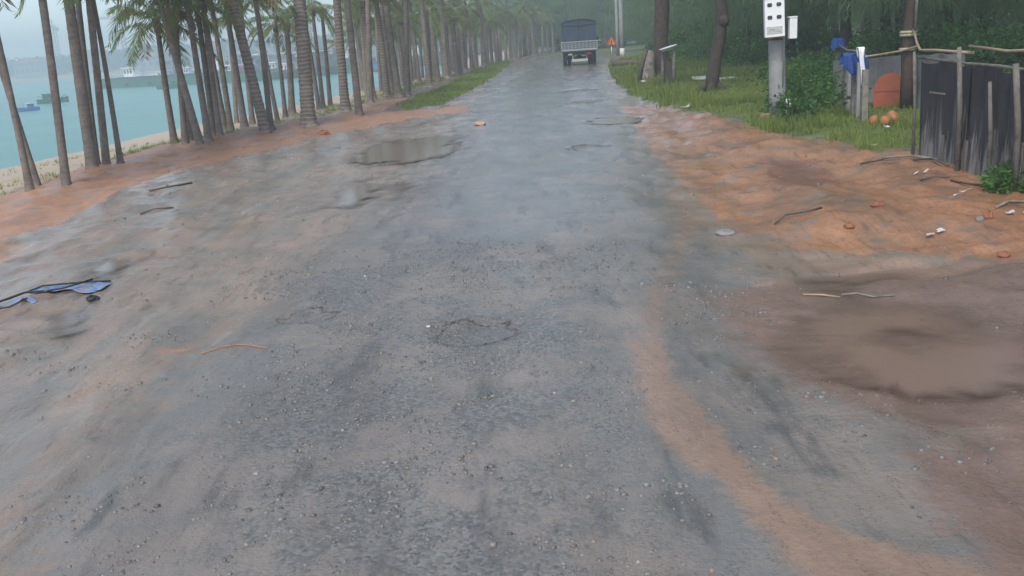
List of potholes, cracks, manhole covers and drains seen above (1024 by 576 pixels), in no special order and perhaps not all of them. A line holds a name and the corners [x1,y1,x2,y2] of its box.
pothole [349,135,464,166]
pothole [585,116,645,125]
pothole [430,318,522,348]
